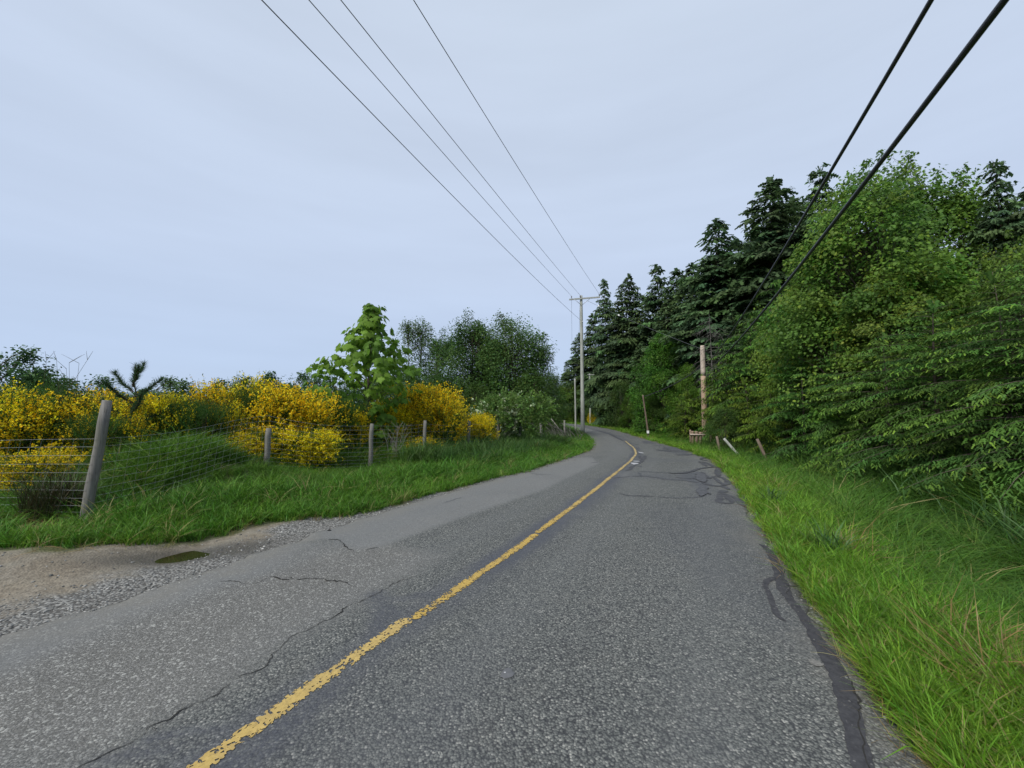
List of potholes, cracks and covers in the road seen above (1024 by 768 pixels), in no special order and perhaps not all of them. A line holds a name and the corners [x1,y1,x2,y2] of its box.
crack [218,576,358,587]
crack [77,578,408,768]
